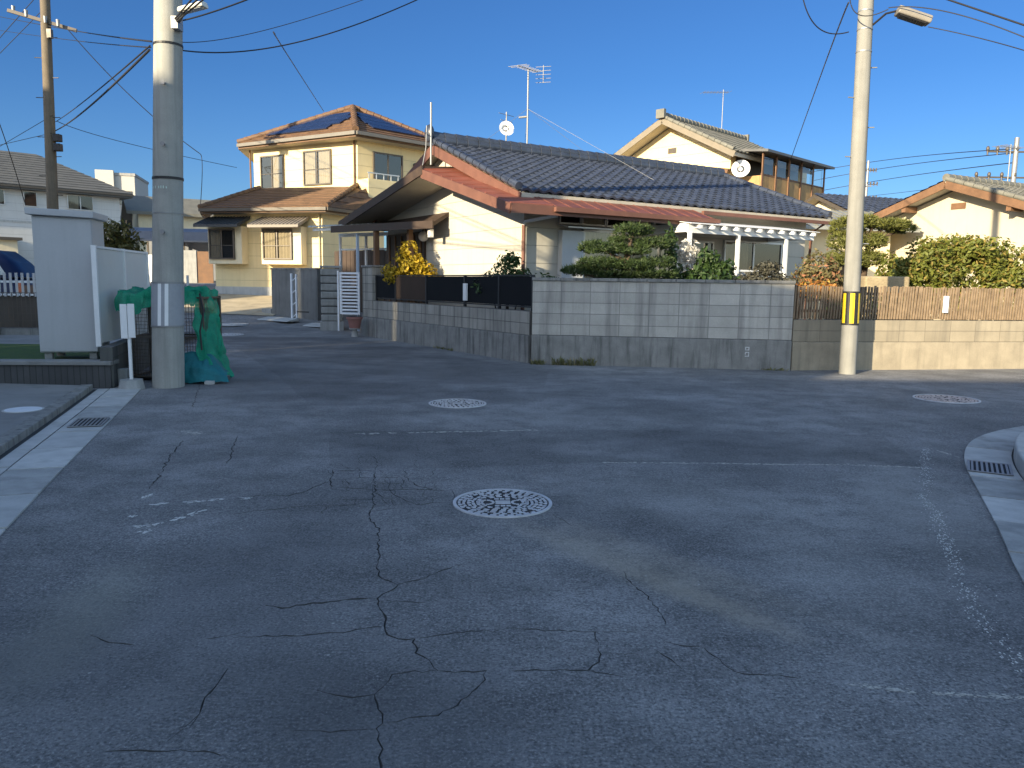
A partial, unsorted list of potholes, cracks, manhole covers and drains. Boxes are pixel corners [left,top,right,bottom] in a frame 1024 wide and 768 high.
drain grate [67,417,110,428]
crack [659,642,800,679]
crack [515,628,638,676]
crack [106,670,227,755]
drain grate [967,459,1014,476]
crack [207,446,499,768]
crack [624,572,666,625]
manhole cover [912,394,981,404]
crack [149,441,184,489]
manhole cover [429,399,486,408]
manhole cover [453,489,552,518]
